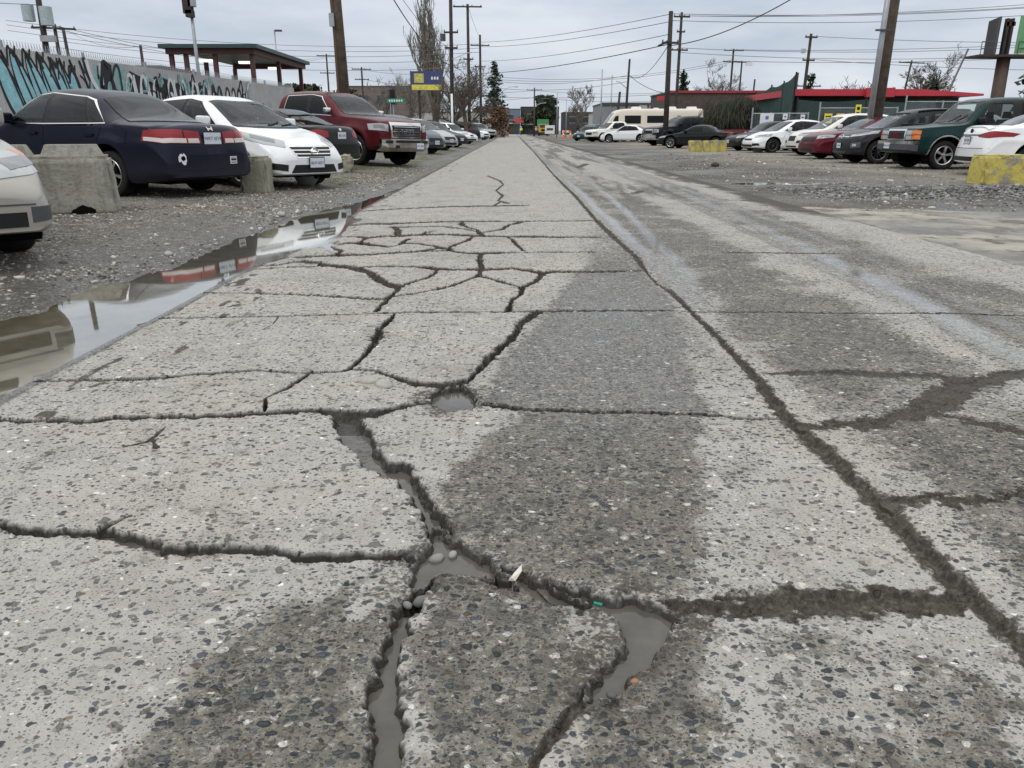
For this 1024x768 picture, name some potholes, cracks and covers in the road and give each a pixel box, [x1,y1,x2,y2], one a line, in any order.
pothole [423,383,487,413]
pothole [547,579,685,709]
crack [0,175,1024,768]
